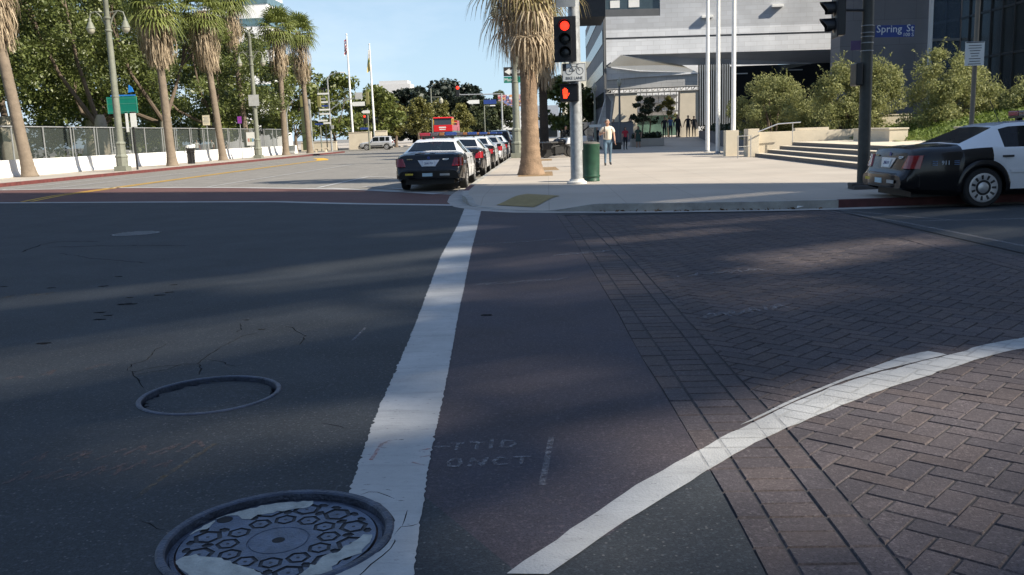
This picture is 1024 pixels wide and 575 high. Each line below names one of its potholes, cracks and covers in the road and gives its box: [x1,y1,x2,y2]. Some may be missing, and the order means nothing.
manhole cover [154,489,394,575]
crack [127,324,256,388]
manhole cover [136,375,281,416]
